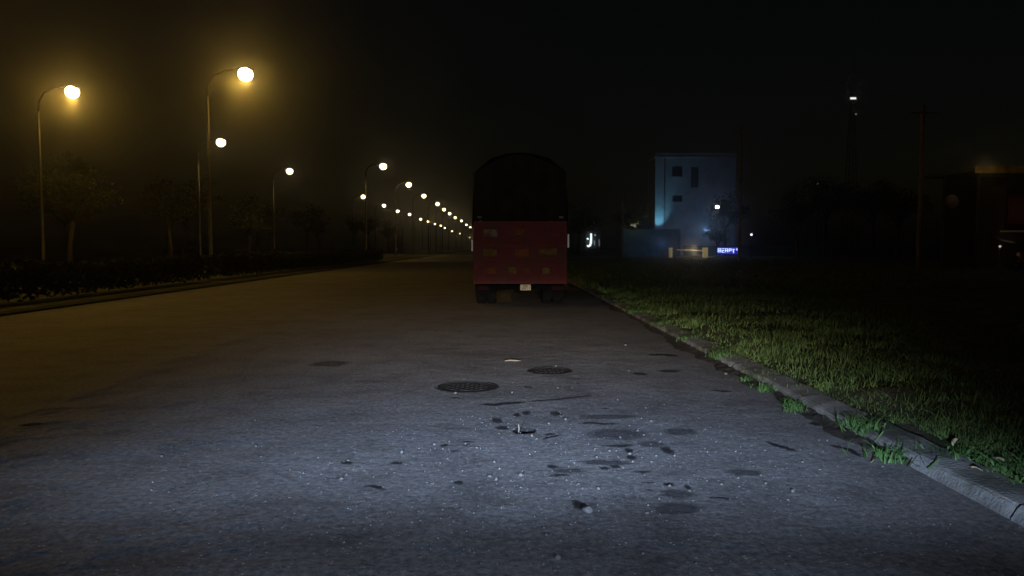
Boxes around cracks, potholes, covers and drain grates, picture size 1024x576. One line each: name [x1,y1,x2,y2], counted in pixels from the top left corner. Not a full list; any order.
manhole cover [436,381,499,393]
pothole [588,429,644,439]
crack [481,395,618,425]
pothole [657,504,700,514]
